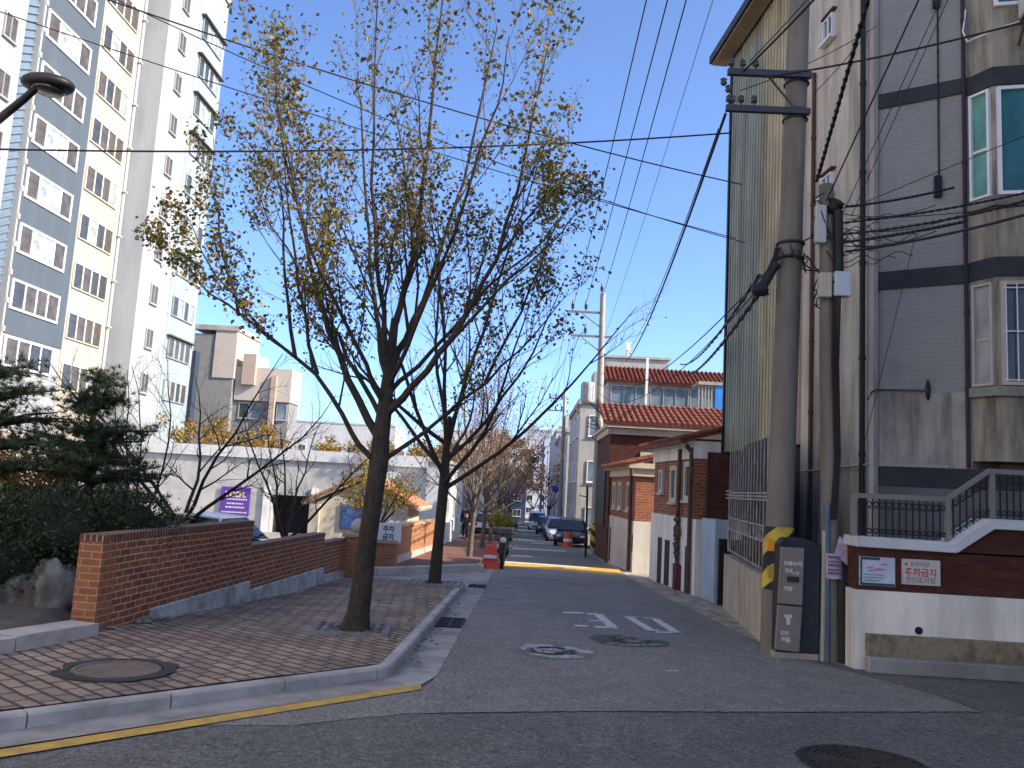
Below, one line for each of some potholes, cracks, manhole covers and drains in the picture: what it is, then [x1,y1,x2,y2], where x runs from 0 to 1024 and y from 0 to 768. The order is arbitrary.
drain grate [434,617,466,628]
manhole cover [794,744,930,768]
manhole cover [511,643,597,659]
manhole cover [50,658,179,683]
manhole cover [589,635,670,647]
